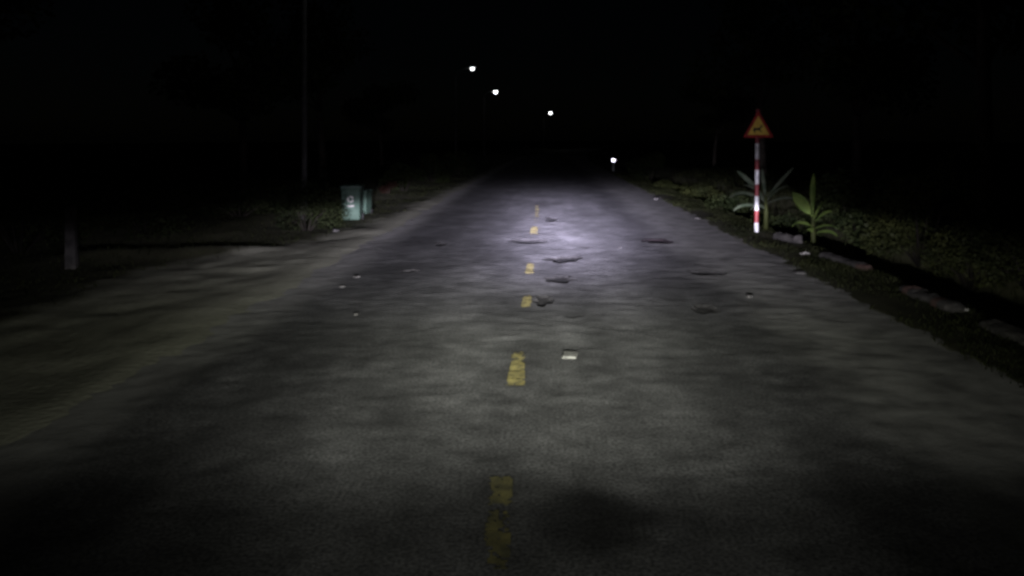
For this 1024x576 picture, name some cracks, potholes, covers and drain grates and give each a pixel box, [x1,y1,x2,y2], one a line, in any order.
pothole [691,304,721,314]
pothole [542,256,583,264]
pothole [544,275,577,283]
pothole [532,295,554,307]
